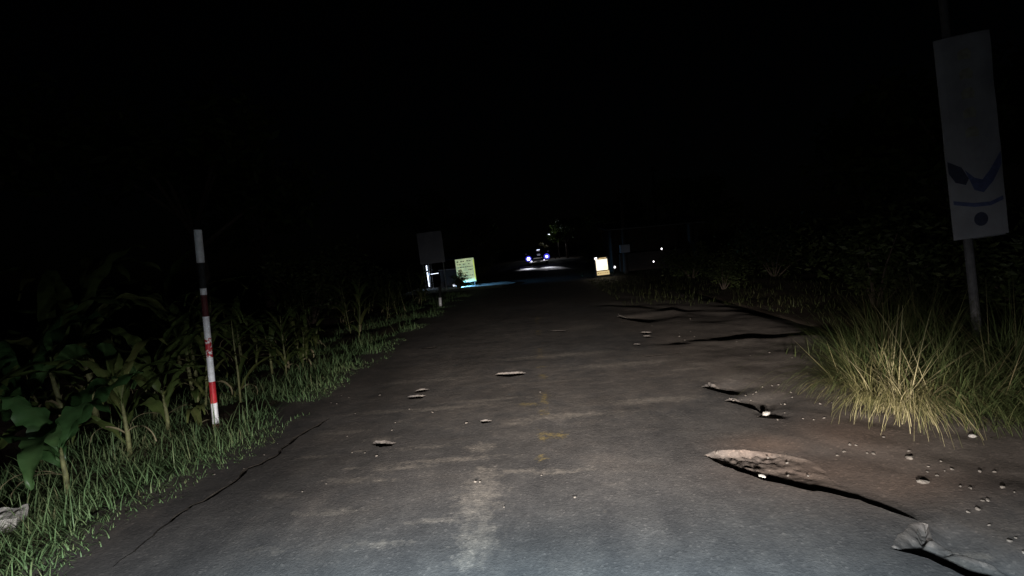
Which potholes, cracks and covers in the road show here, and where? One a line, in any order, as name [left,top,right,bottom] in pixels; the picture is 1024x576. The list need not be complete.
crack [113,419,328,567]
